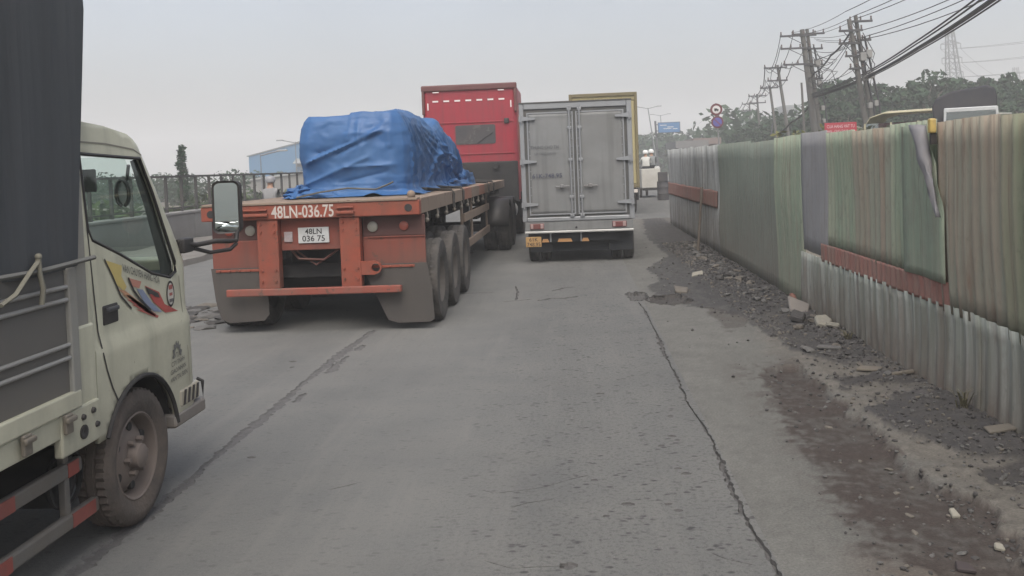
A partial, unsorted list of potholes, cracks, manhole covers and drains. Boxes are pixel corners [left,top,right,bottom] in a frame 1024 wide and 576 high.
pothole [645,294,695,306]
pothole [625,291,651,301]
crack [483,475,587,507]
crack [638,302,782,576]
crack [461,286,577,302]
